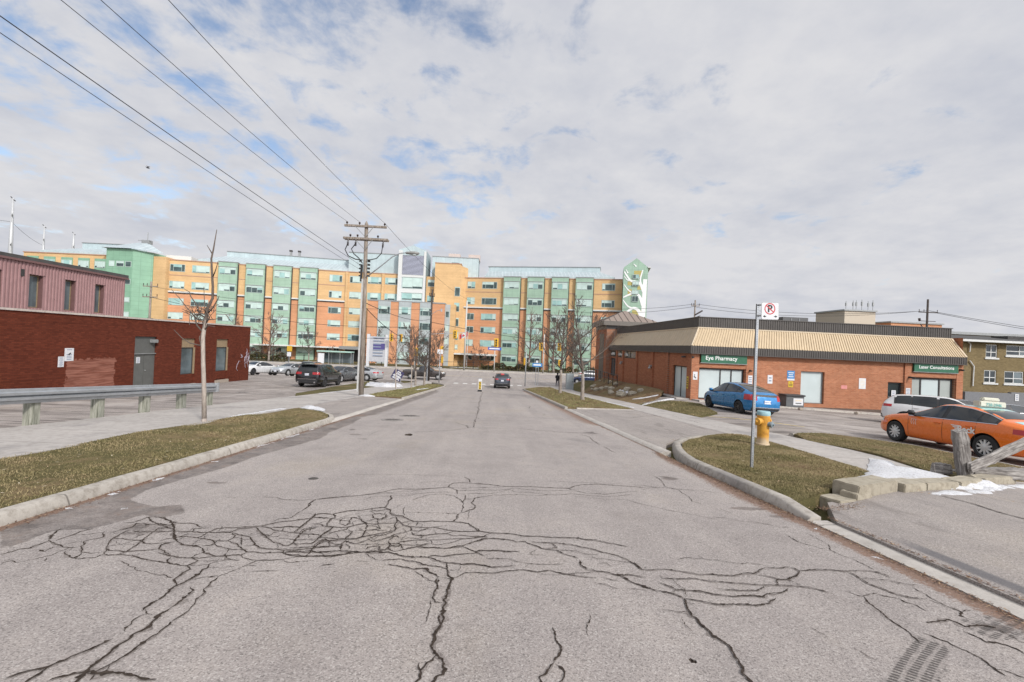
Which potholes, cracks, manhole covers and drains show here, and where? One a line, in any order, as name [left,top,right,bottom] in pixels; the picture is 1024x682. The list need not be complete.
crack [3,475,925,682]
crack [847,589,1024,678]
